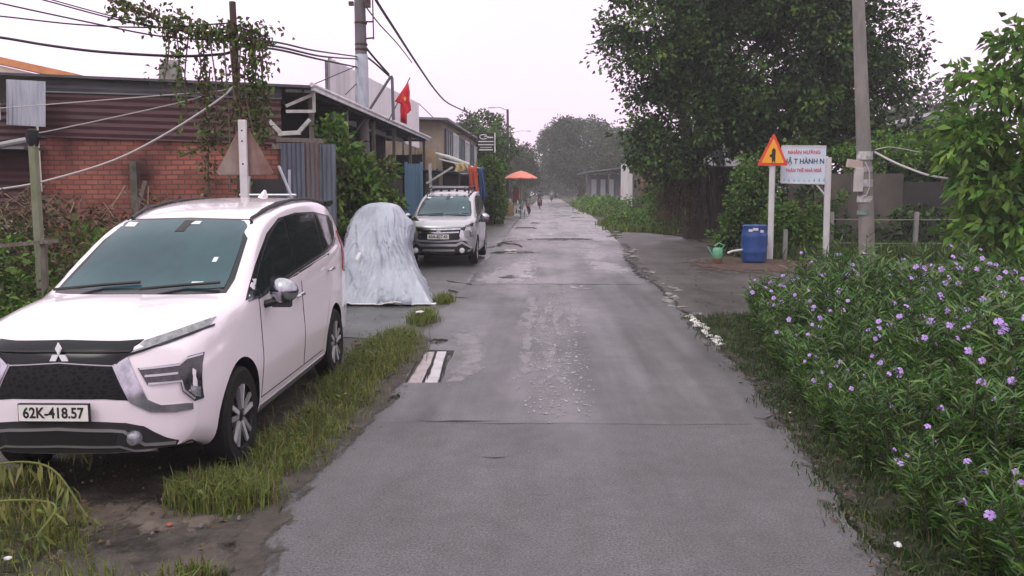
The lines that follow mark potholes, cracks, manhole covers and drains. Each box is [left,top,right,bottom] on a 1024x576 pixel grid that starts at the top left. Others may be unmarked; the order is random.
crack [623,256,722,343]
